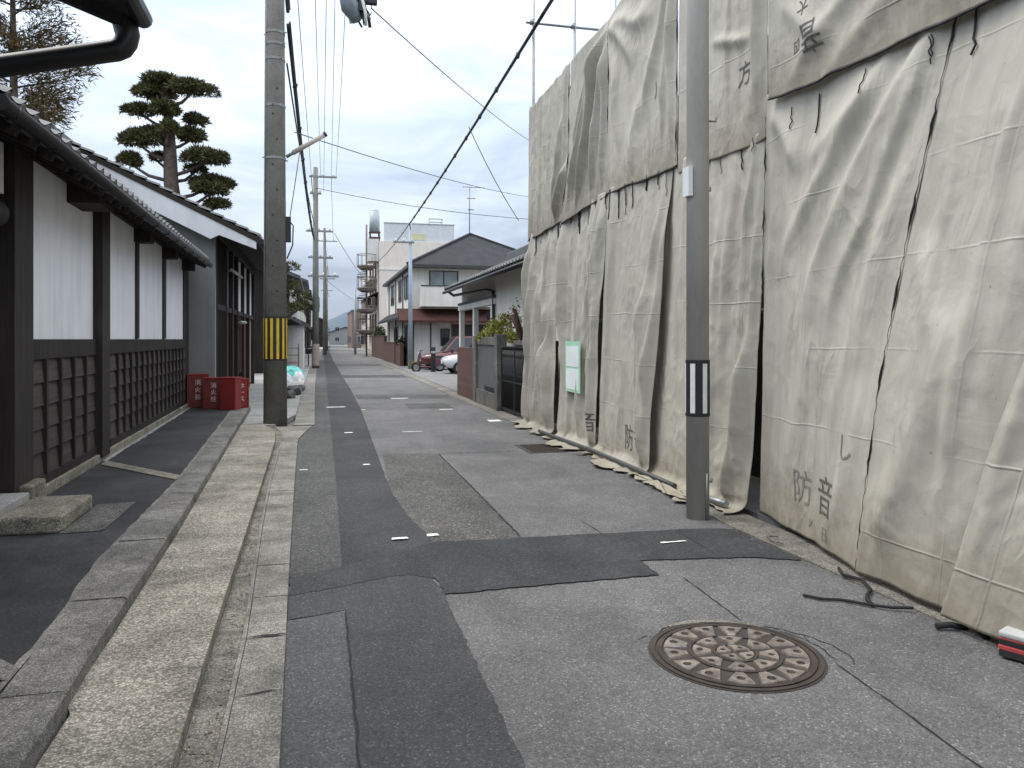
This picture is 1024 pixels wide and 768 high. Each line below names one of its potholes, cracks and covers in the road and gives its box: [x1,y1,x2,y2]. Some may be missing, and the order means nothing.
manhole cover [648,619,828,694]
crack [762,626,983,768]
